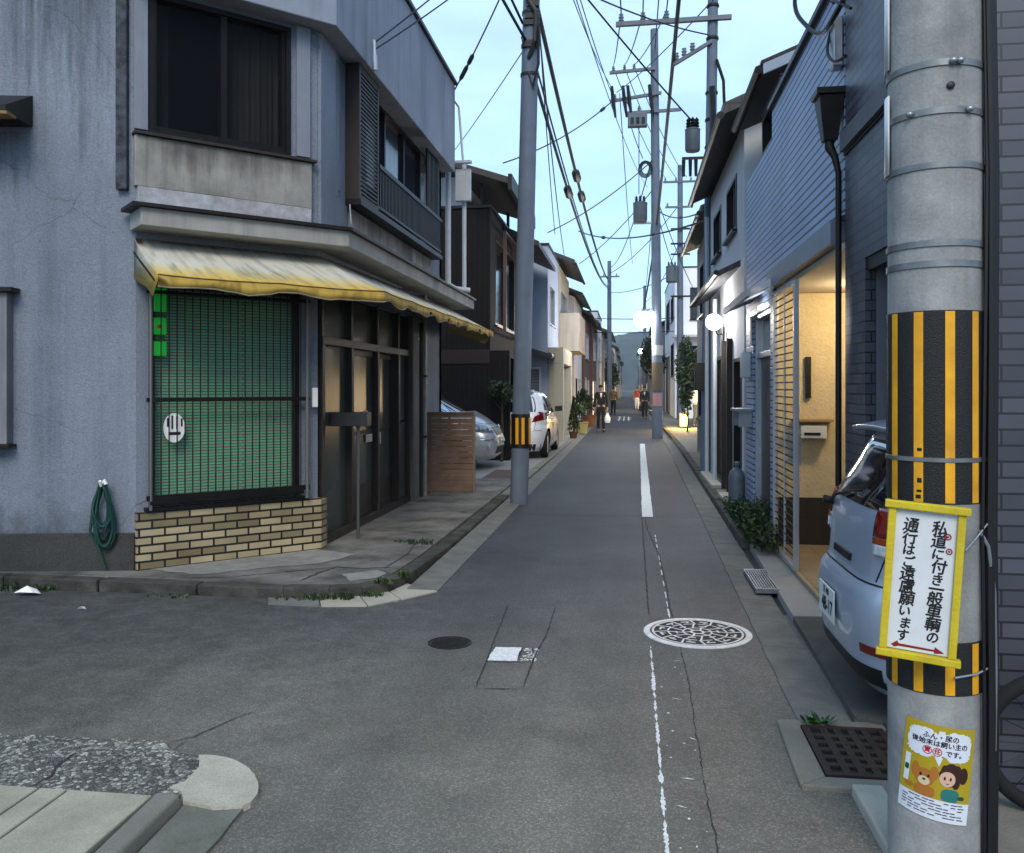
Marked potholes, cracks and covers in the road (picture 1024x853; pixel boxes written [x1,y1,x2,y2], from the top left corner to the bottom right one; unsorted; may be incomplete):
drain grate [776,719,888,794]
crack [171,711,254,750]
manhole cover [428,636,472,650]
drain grate [743,569,780,595]
manhole cover [644,618,753,649]
crack [31,750,81,787]
